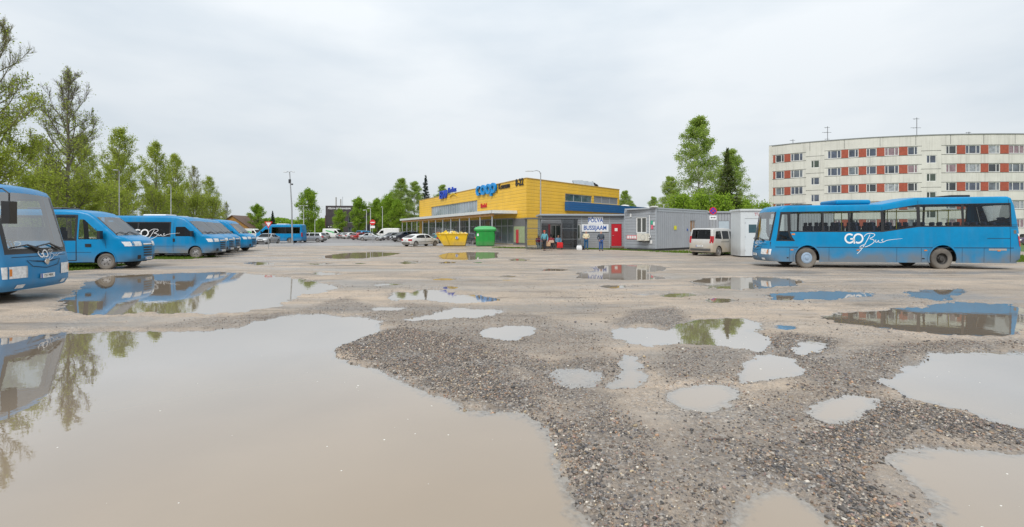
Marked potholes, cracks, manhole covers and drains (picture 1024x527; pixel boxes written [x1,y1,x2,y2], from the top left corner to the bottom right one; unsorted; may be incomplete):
pothole [779,336,844,357]
pothole [709,478,849,527]
pothole [597,350,657,390]
pothole [727,351,816,385]
pothole [806,299,1024,337]
pothole [0,309,611,527]
pothole [605,315,783,353]
pothole [865,346,1024,428]
pothole [797,386,891,425]
pothole [657,377,748,415]
pothole [863,435,1024,527]
pothole [37,270,347,319]
